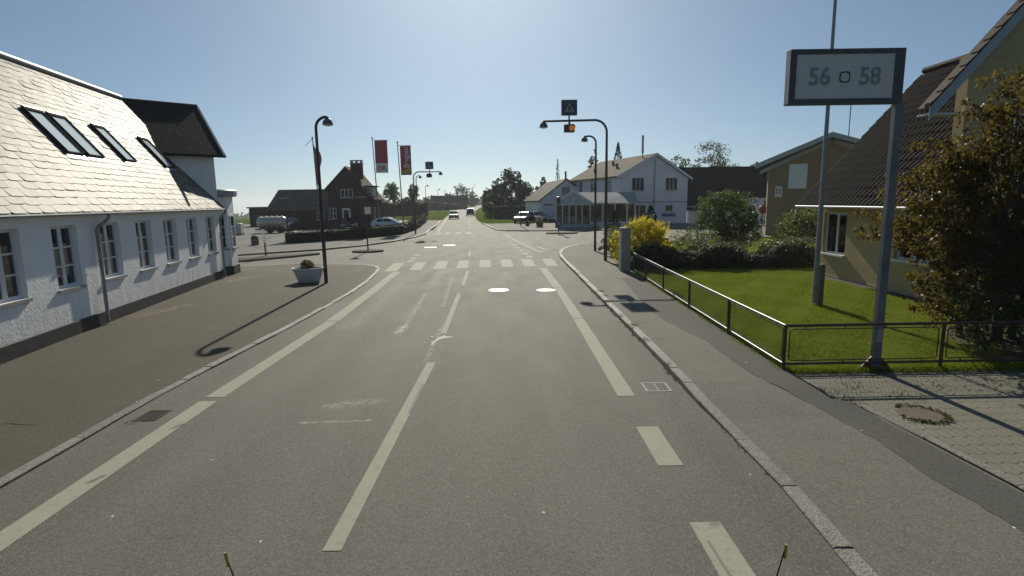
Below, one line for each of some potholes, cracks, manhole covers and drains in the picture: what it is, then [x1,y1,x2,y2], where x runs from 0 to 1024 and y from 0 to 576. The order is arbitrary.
drain grate [640,382,673,392]
drain grate [132,410,172,422]
manhole cover [894,403,956,424]
